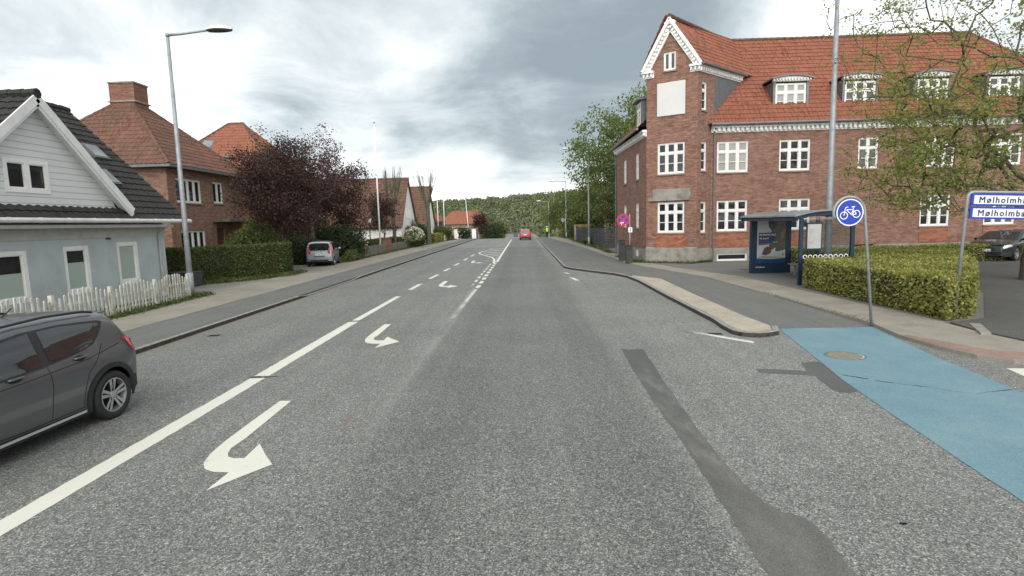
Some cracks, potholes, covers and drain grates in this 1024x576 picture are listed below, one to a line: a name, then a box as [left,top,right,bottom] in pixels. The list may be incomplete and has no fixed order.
manhole cover [824,351,867,360]
